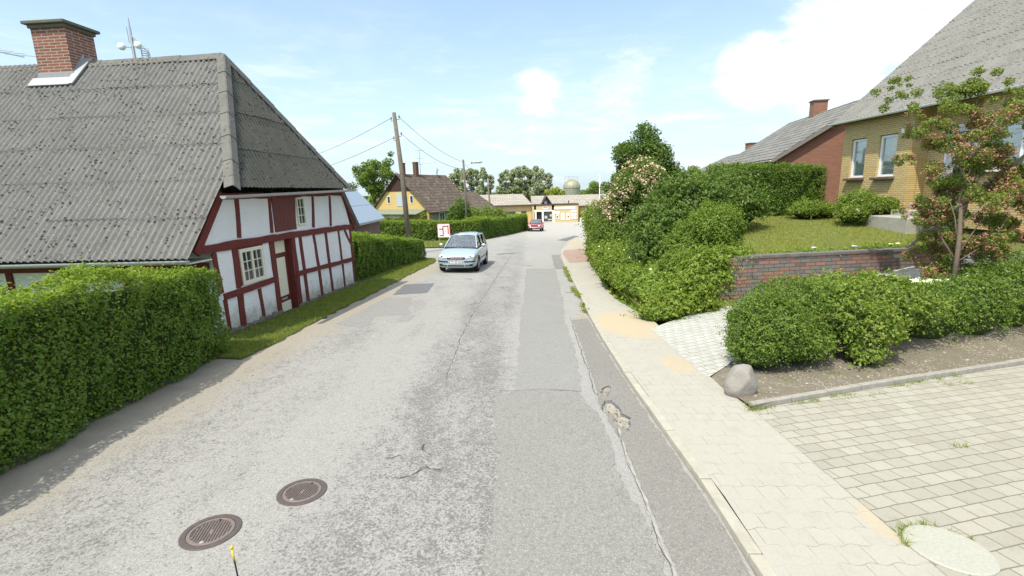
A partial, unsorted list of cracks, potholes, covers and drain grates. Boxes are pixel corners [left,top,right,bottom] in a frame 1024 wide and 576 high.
manhole cover [178,514,242,551]
manhole cover [276,478,327,506]
crack [618,428,677,576]
pothole [601,400,632,430]
